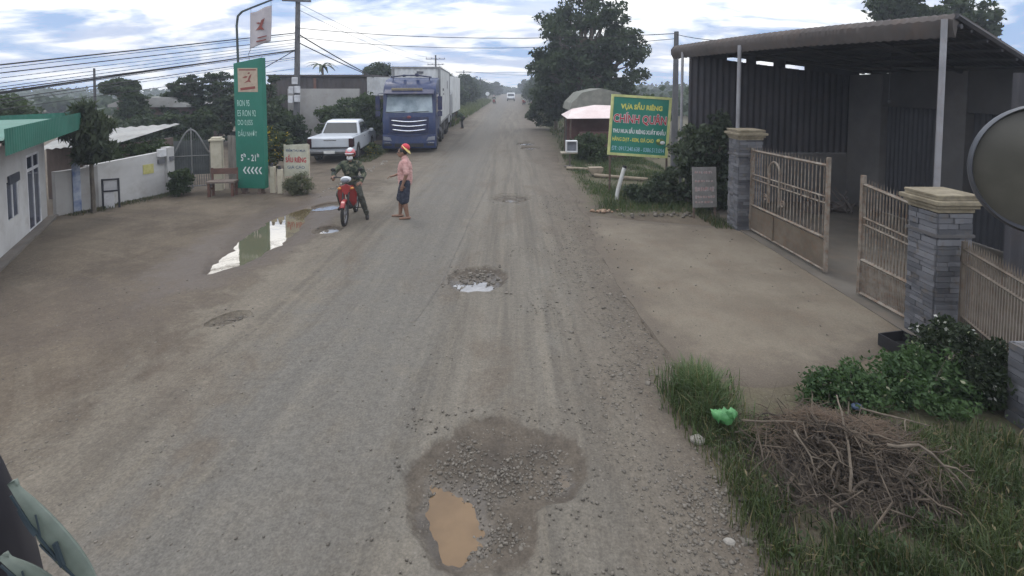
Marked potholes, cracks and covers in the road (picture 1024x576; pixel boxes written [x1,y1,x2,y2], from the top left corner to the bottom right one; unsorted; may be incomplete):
pothole [485,194,535,204]
pothole [196,307,259,330]
pothole [311,224,350,234]
pothole [309,202,340,213]
pothole [441,263,515,295]
pothole [370,405,627,576]
